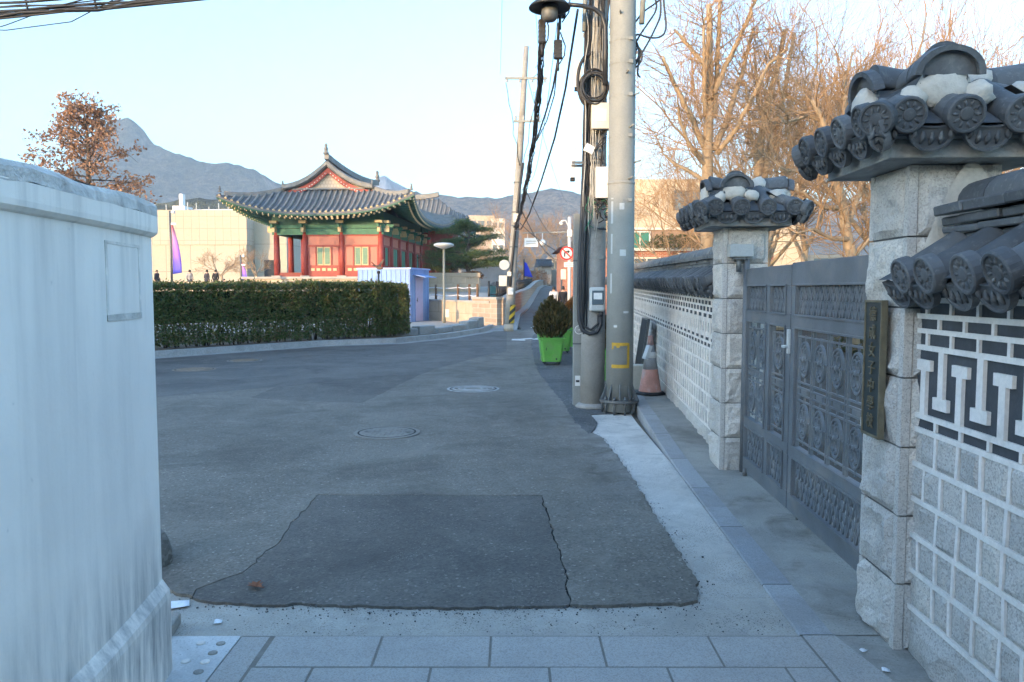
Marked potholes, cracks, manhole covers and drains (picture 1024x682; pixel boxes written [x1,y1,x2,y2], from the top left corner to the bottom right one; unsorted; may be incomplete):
manhole cover [353,426,420,440]
crack [542,498,571,607]
